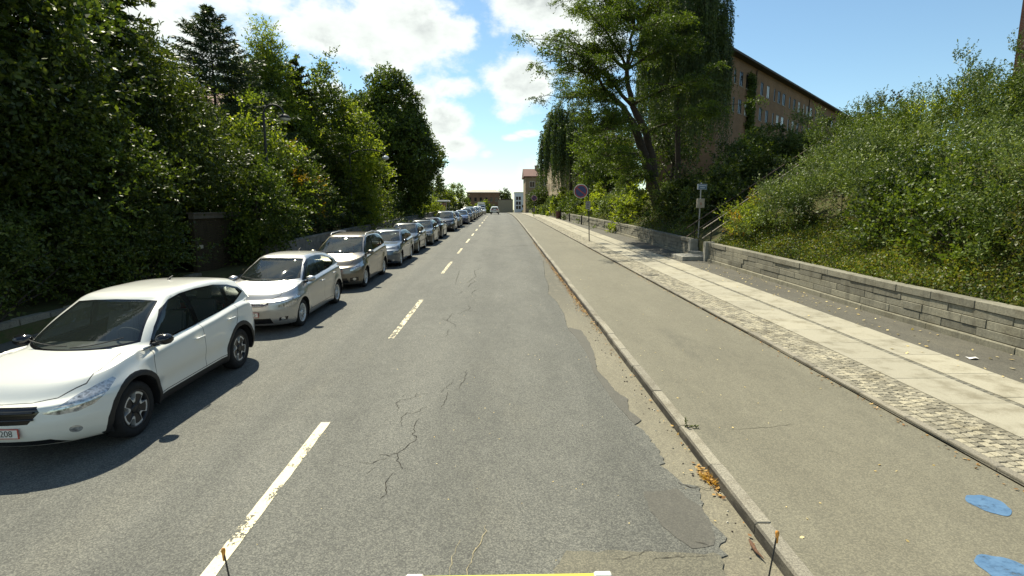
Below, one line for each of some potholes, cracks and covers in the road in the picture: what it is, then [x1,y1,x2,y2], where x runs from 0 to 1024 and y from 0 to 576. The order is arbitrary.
crack [365,370,467,497]
crack [449,525,487,575]
